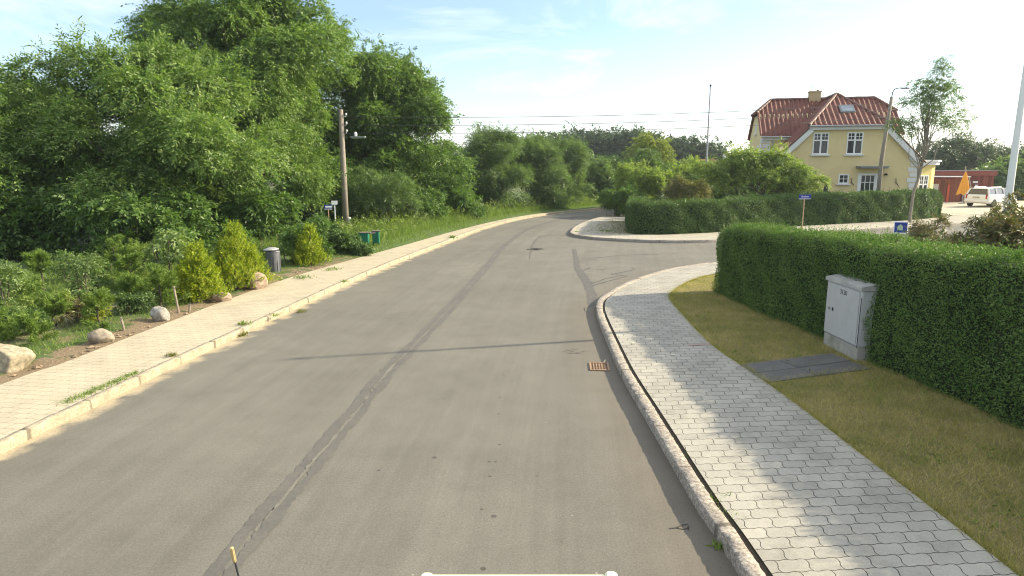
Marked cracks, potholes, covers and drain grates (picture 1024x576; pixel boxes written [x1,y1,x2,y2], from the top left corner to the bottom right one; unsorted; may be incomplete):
drain grate [589,362,610,371]
crack [572,249,688,310]
